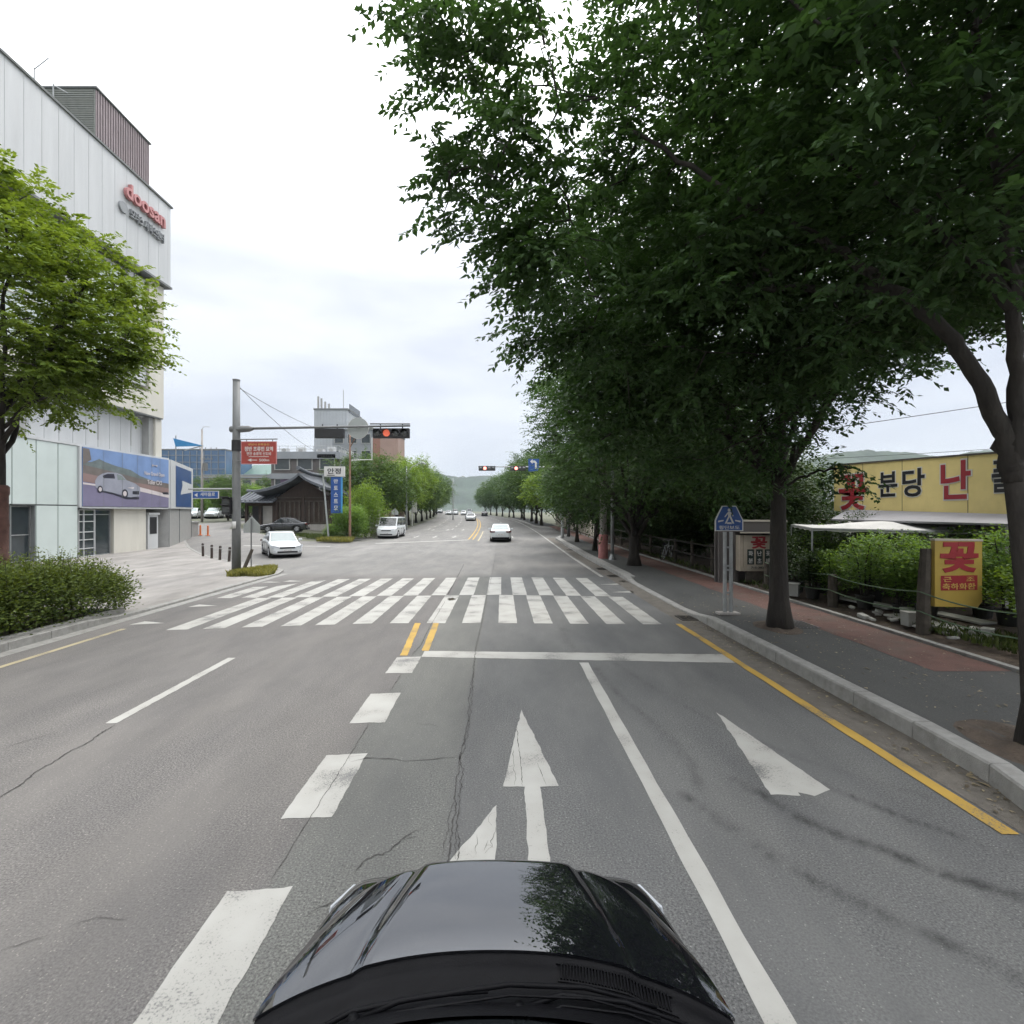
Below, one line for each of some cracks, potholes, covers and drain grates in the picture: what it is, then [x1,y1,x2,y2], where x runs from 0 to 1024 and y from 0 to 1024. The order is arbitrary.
crack [350,559,496,861]
crack [0,727,111,797]
crack [341,829,419,872]
